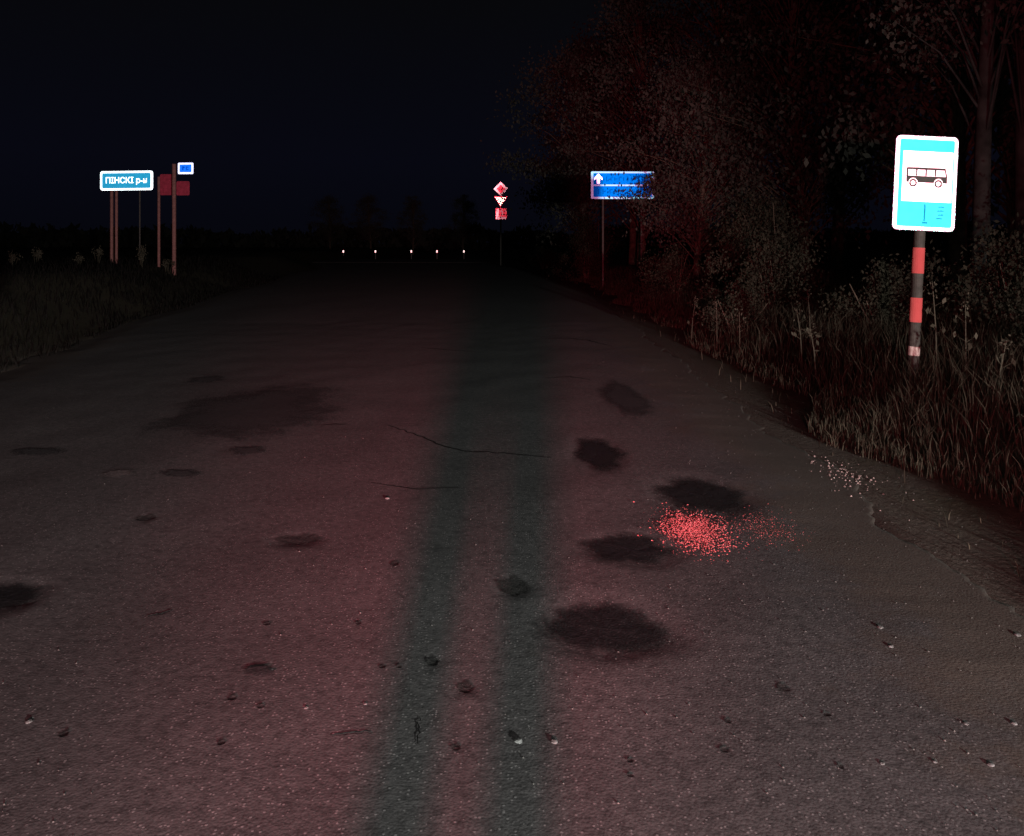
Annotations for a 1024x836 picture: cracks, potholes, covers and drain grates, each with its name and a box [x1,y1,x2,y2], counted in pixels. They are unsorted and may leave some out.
pothole [0,583,41,608]
crack [388,425,549,458]
pothole [541,603,667,653]
pothole [275,534,322,545]
pothole [580,533,676,565]
pothole [574,439,624,471]
pothole [655,480,745,513]
pothole [496,576,530,597]
